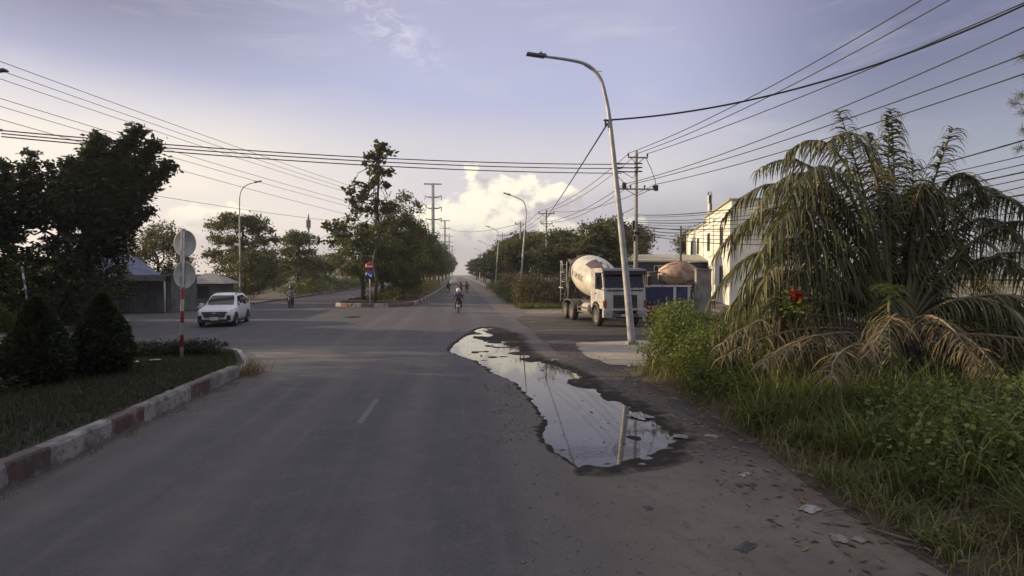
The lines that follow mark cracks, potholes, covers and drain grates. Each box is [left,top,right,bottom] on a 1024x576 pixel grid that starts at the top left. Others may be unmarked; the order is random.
pothole [446,326,705,477]
